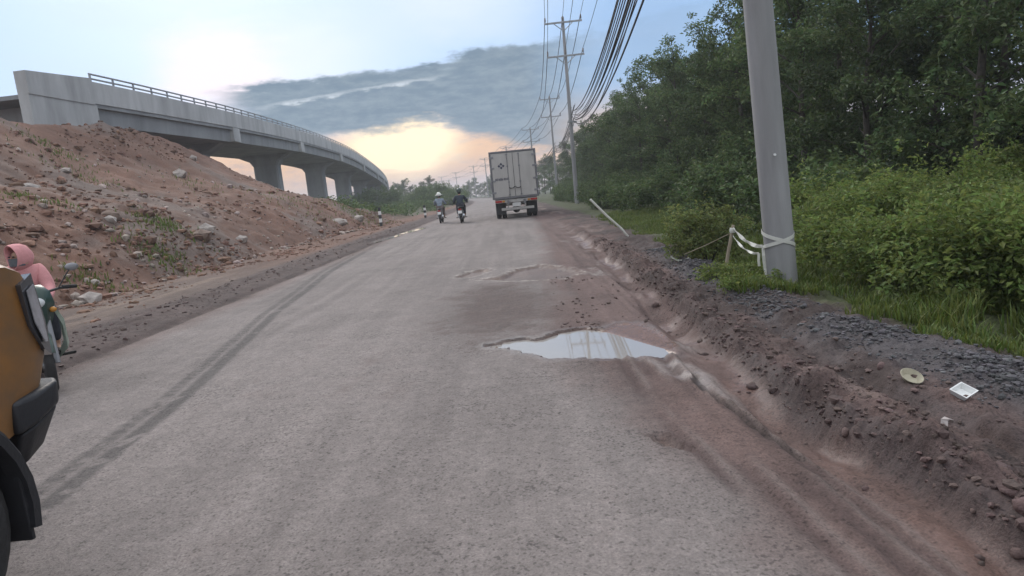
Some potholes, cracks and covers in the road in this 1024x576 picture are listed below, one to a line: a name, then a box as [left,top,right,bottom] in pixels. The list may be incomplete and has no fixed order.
pothole [483,322,683,360]
pothole [450,268,493,278]
pothole [471,265,586,281]
